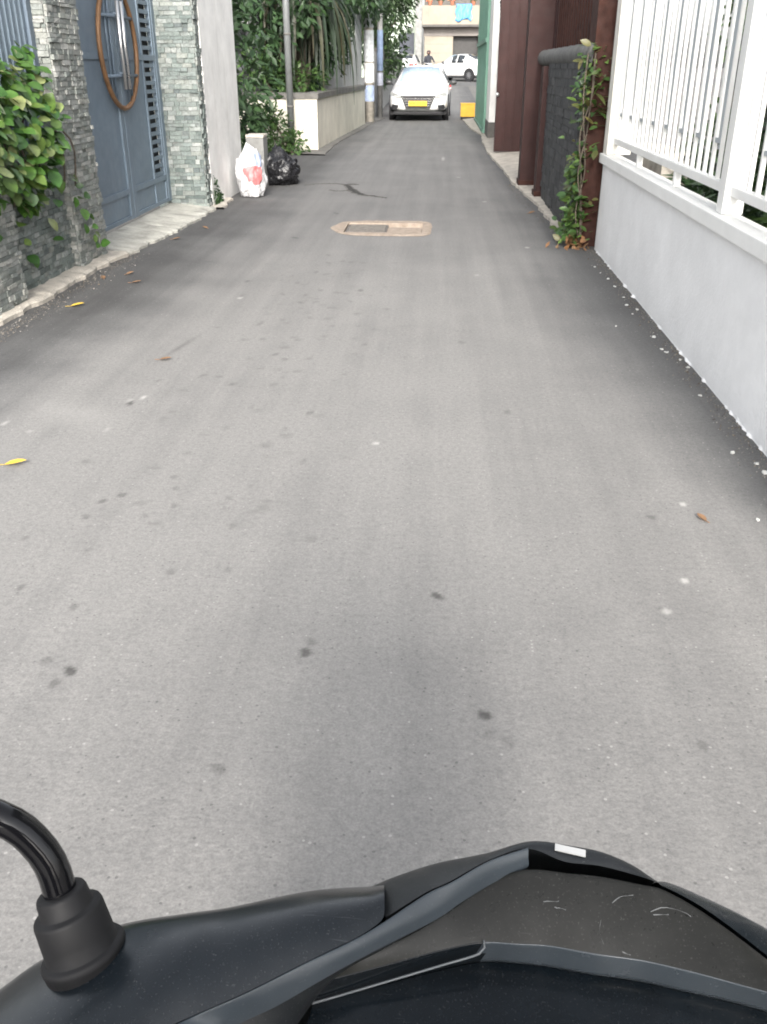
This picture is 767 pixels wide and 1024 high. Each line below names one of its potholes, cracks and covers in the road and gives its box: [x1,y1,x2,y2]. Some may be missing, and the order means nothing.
crack [306,183,386,198]
